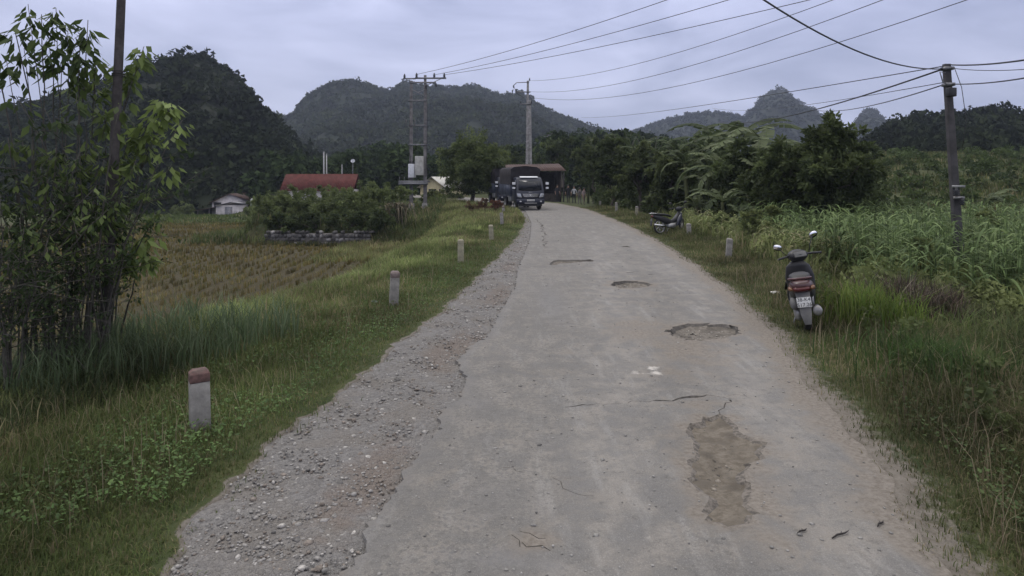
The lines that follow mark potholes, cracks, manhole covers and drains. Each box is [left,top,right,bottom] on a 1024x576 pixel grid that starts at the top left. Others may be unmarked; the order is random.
pothole [686,414,768,527]
crack [571,395,747,414]
crack [512,531,551,551]
pothole [664,323,742,341]
